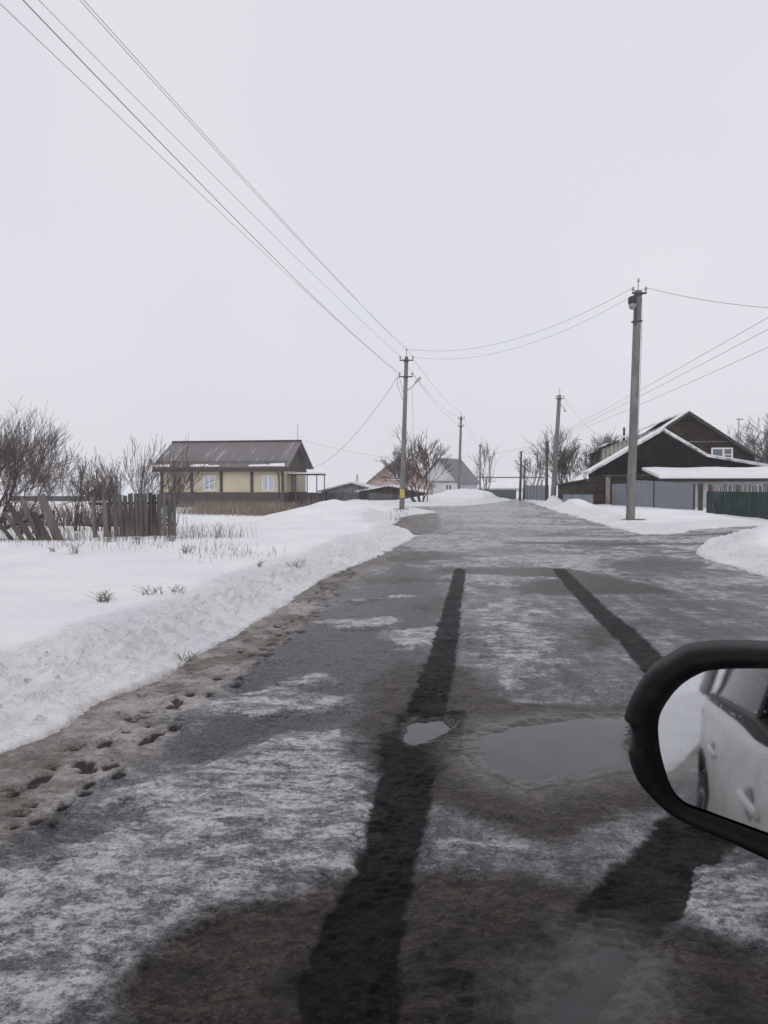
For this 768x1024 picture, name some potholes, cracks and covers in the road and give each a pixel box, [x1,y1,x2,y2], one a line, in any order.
pothole [521,929,659,1024]
pothole [396,714,462,746]
pothole [458,711,633,791]
